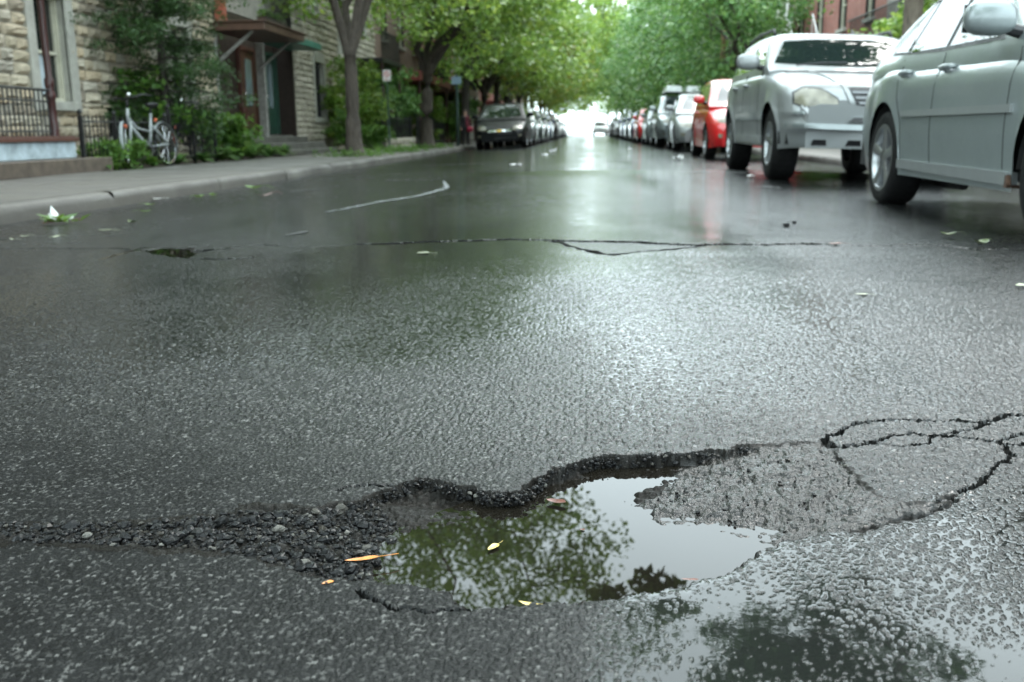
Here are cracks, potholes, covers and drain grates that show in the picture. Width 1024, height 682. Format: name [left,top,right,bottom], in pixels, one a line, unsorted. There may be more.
crack [355,589,471,615]
crack [821,413,1024,494]
crack [190,231,1024,260]
pothole [0,440,1024,611]
